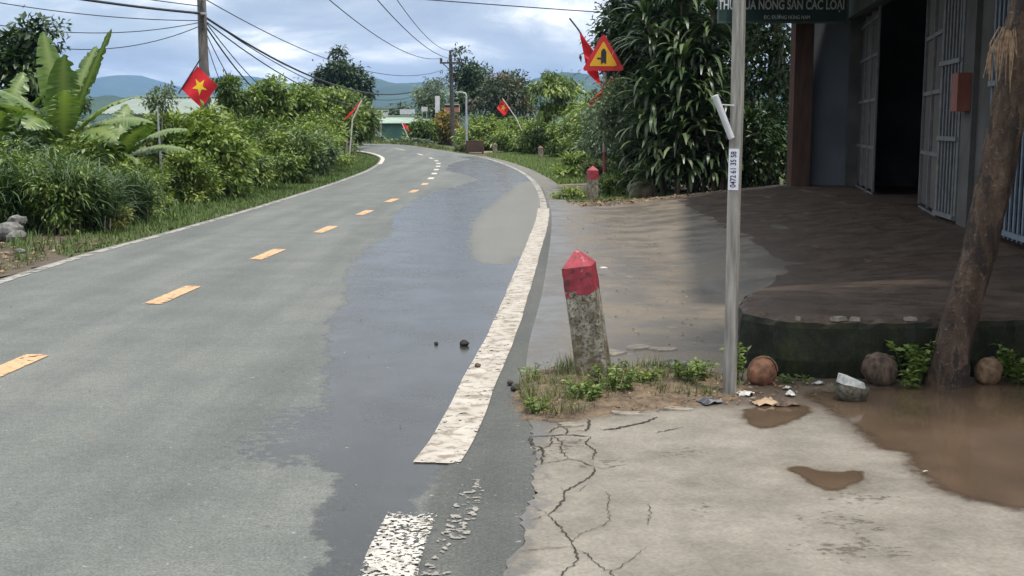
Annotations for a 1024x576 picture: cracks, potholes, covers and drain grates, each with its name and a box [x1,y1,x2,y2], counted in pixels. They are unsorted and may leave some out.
crack [520,417,683,576]
